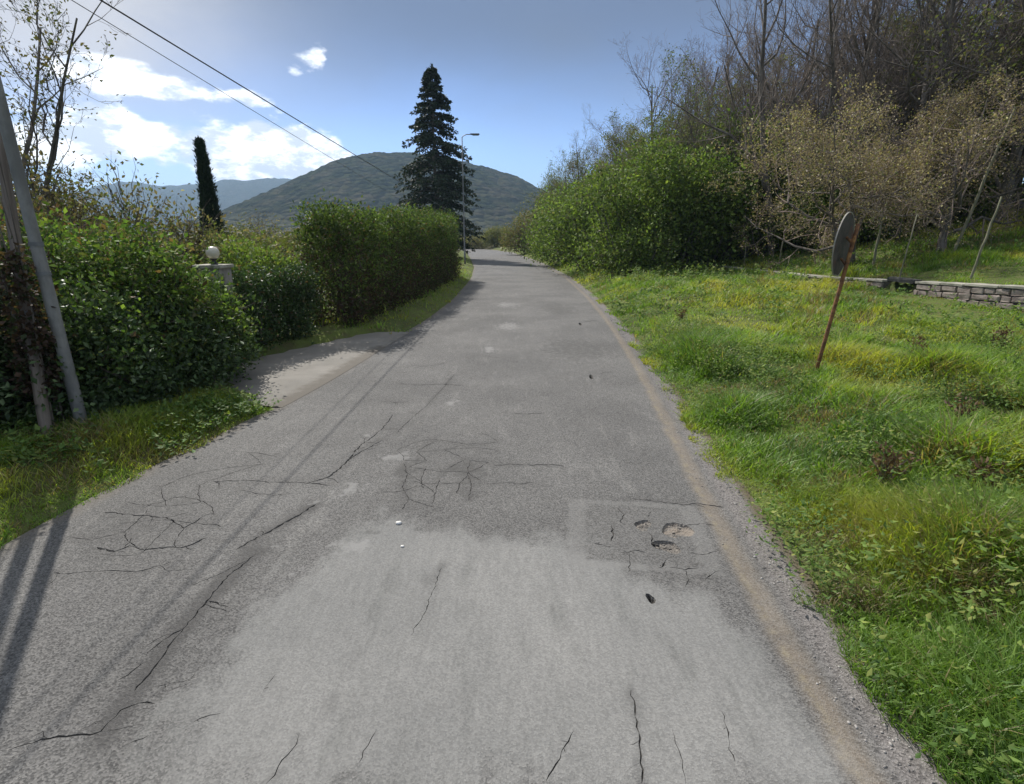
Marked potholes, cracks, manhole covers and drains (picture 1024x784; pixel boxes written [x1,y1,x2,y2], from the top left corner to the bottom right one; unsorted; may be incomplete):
crack [629,693,644,781]
pothole [651,540,681,554]
pothole [662,522,695,538]
pothole [634,520,652,531]
crack [385,433,561,509]
crack [546,732,573,781]
crack [46,401,399,586]
